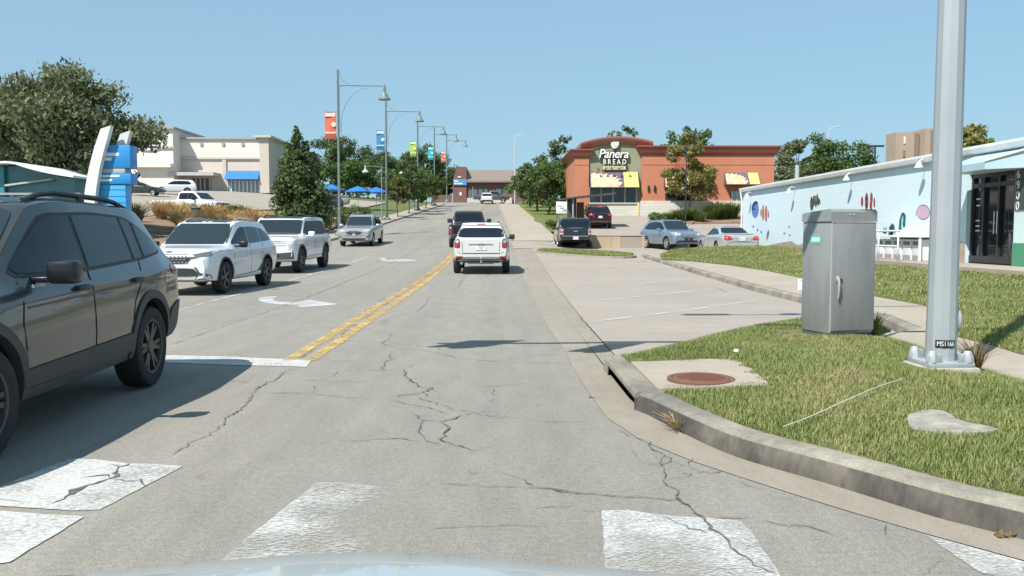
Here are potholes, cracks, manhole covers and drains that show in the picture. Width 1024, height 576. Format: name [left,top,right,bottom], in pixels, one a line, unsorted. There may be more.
crack [438,429,886,573]
manhole cover [667,372,735,386]
drain grate [608,360,657,410]
crack [173,297,571,454]
